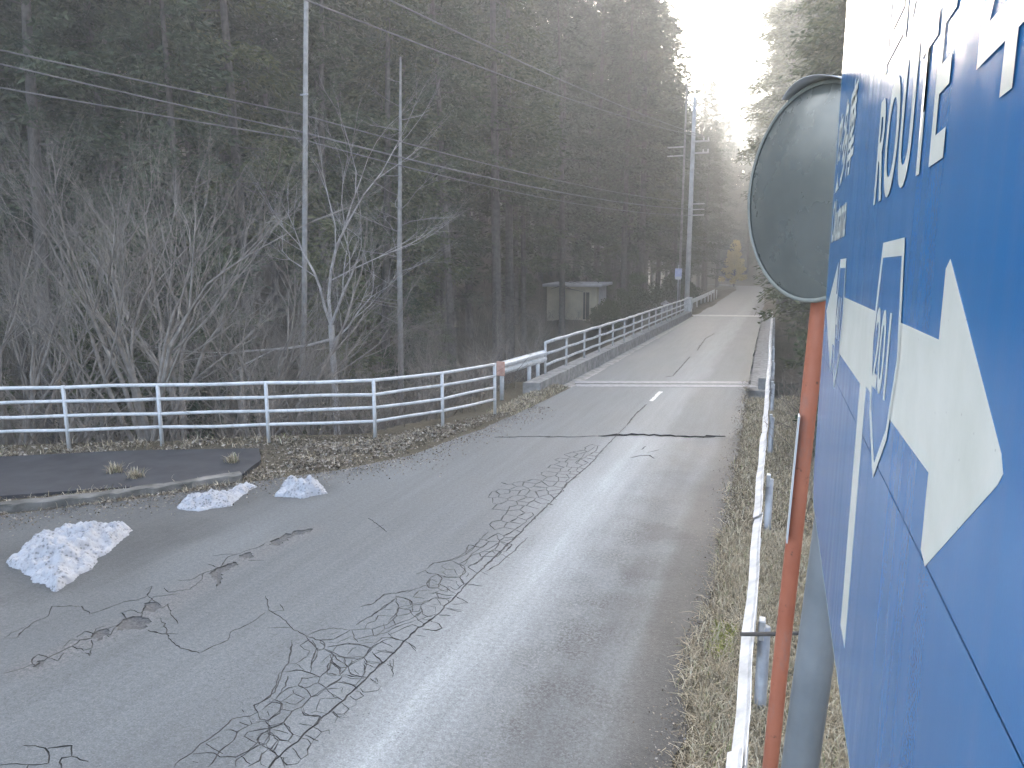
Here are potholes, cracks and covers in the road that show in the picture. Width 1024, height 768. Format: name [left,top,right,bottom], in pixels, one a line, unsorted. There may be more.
pothole [92,628,111,641]
crack [3,426,657,768]
pothole [269,528,313,546]
pothole [209,562,238,588]
pothole [115,615,152,631]
crack [518,406,726,458]
